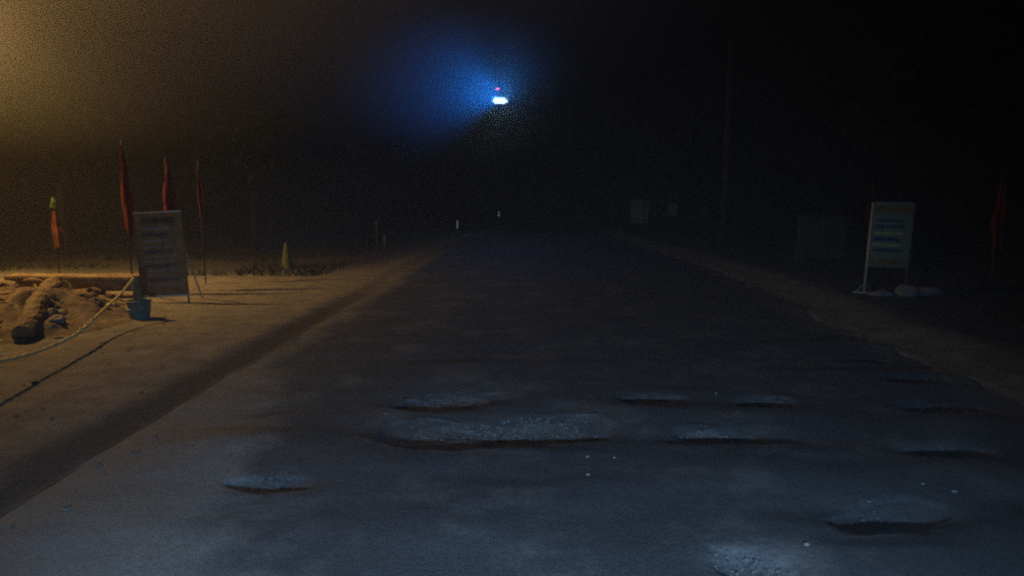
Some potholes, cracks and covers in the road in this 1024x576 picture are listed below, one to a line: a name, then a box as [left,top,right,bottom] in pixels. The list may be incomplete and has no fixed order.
pothole [385,386,515,416]
pothole [893,397,996,416]
pothole [662,422,797,446]
pothole [893,438,1008,460]
pothole [691,538,806,576]
pothole [212,468,324,499]
pothole [611,390,695,406]
pothole [362,412,627,453]
pothole [729,393,805,409]
pothole [879,371,949,385]
pothole [813,490,966,538]
